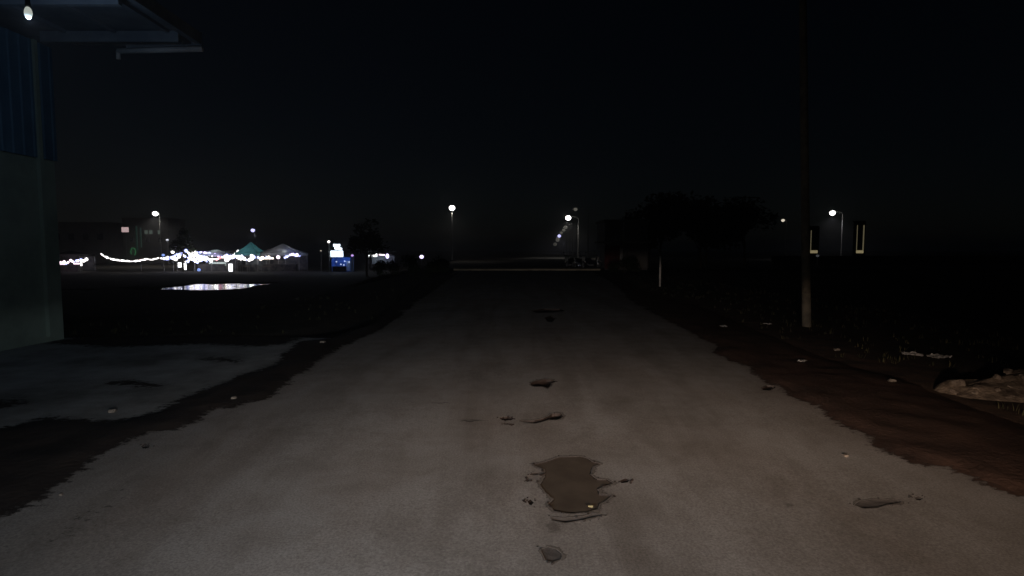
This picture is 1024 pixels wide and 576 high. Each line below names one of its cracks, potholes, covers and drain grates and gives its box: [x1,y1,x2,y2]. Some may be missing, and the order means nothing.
pothole [849,497,904,509]
pothole [519,412,566,424]
pothole [531,455,618,514]
pothole [548,512,607,523]
pothole [529,378,557,389]
pothole [536,545,566,565]
